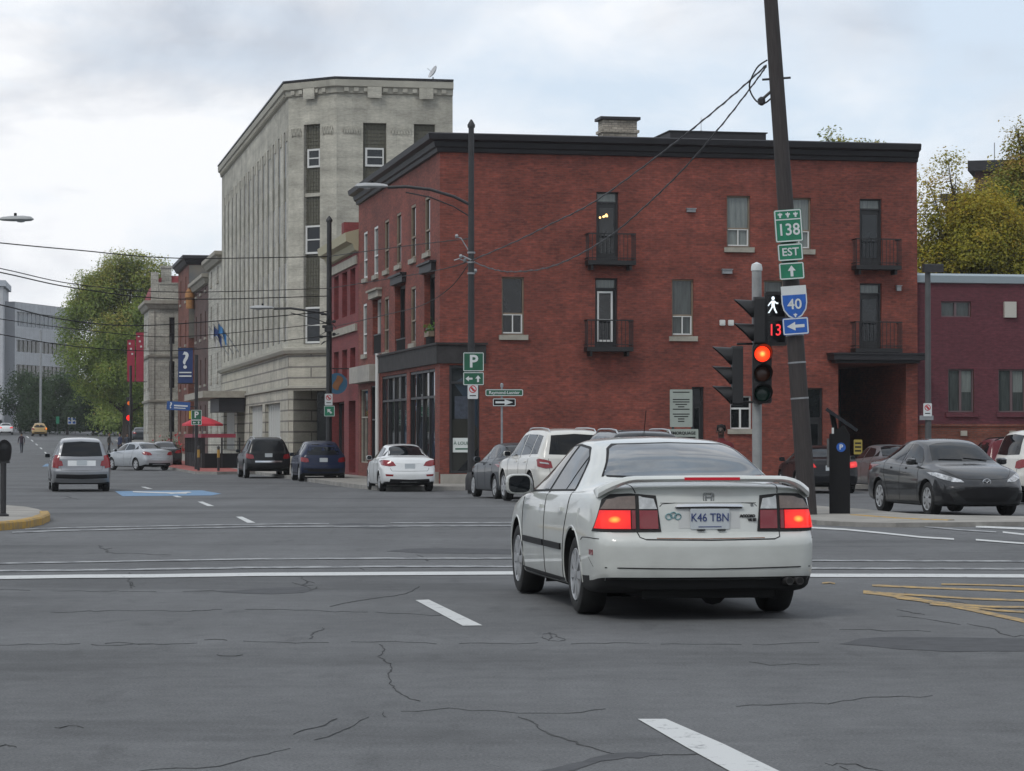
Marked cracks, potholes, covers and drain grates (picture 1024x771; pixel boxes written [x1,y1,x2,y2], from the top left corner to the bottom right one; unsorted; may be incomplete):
crack [141,644,698,771]
crack [54,586,439,639]
crack [736,695,933,707]
